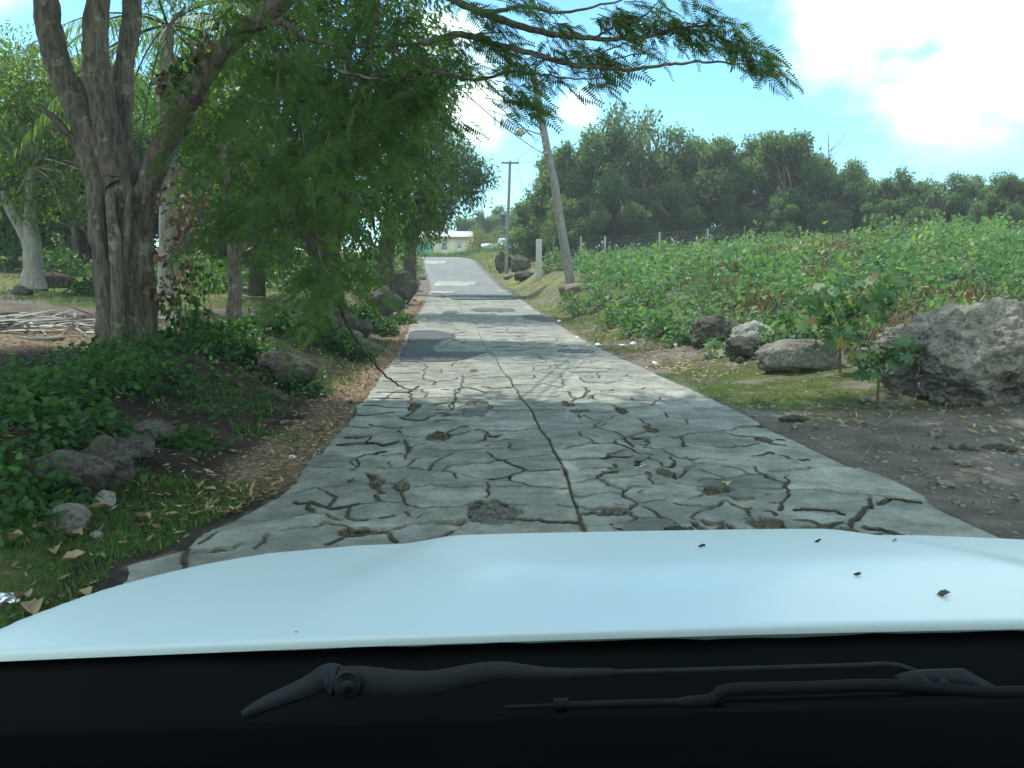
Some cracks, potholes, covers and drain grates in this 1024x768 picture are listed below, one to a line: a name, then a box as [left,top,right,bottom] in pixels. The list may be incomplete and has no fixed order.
pothole [469,502,522,526]
crack [180,531,267,569]
pothole [750,517,785,529]
crack [427,313,604,403]
pothole [702,488,729,496]
crack [288,361,922,545]
pothole [427,430,451,441]
